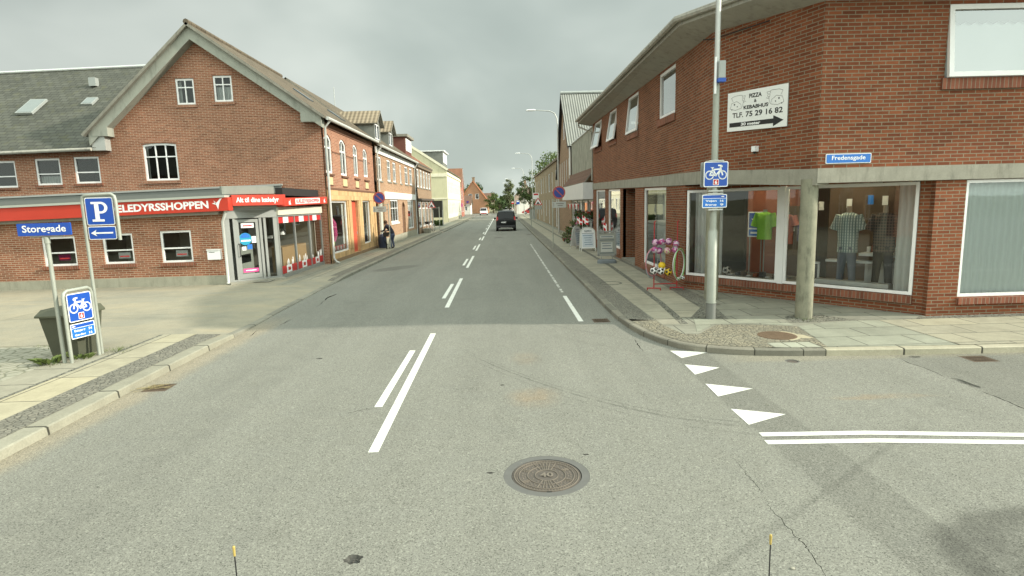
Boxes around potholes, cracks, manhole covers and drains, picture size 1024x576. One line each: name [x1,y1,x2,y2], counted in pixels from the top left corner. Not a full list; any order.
crack [739,465,826,576]
drain grate [130,383,176,392]
manhole cover [757,331,797,340]
manhole cover [504,456,590,497]
pothole [343,555,363,564]
